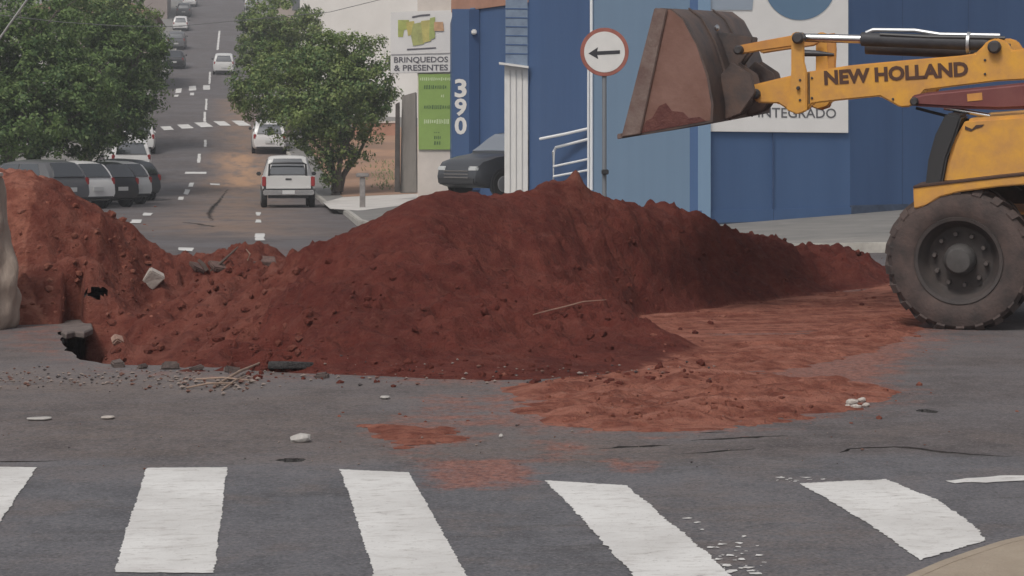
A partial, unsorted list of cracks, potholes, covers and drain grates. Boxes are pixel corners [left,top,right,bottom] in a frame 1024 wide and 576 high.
crack [685,432,772,454]
crack [842,447,993,456]
crack [183,190,227,227]
